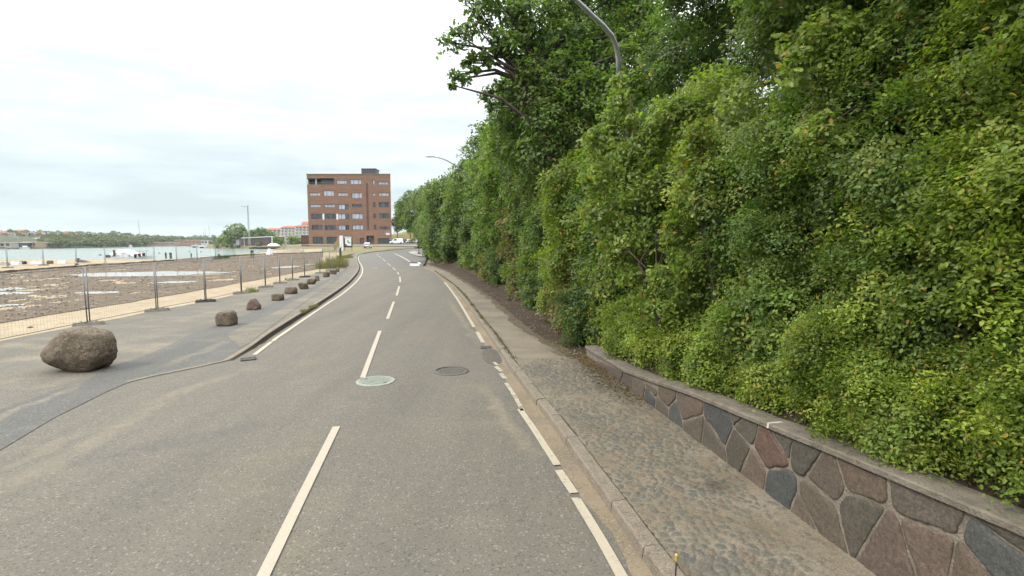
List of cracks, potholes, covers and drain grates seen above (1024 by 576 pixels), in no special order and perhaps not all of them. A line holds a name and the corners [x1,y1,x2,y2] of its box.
manhole cover [433,366,469,376]
manhole cover [356,376,395,387]
